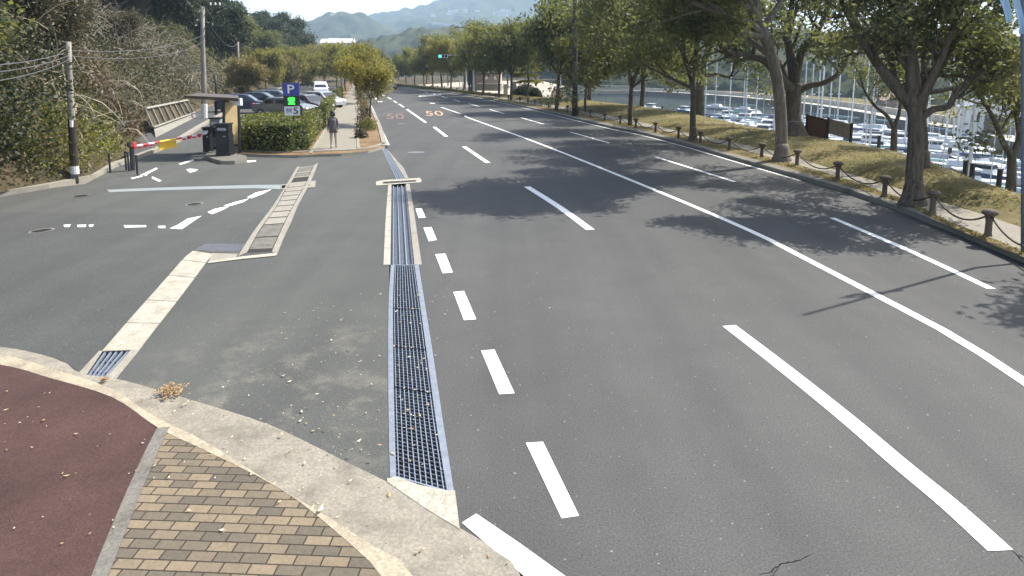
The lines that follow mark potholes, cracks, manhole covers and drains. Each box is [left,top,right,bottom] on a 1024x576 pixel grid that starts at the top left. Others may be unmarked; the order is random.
crack [760,555,809,576]
drain grate [388,265,454,490]
drain grate [79,350,139,397]
